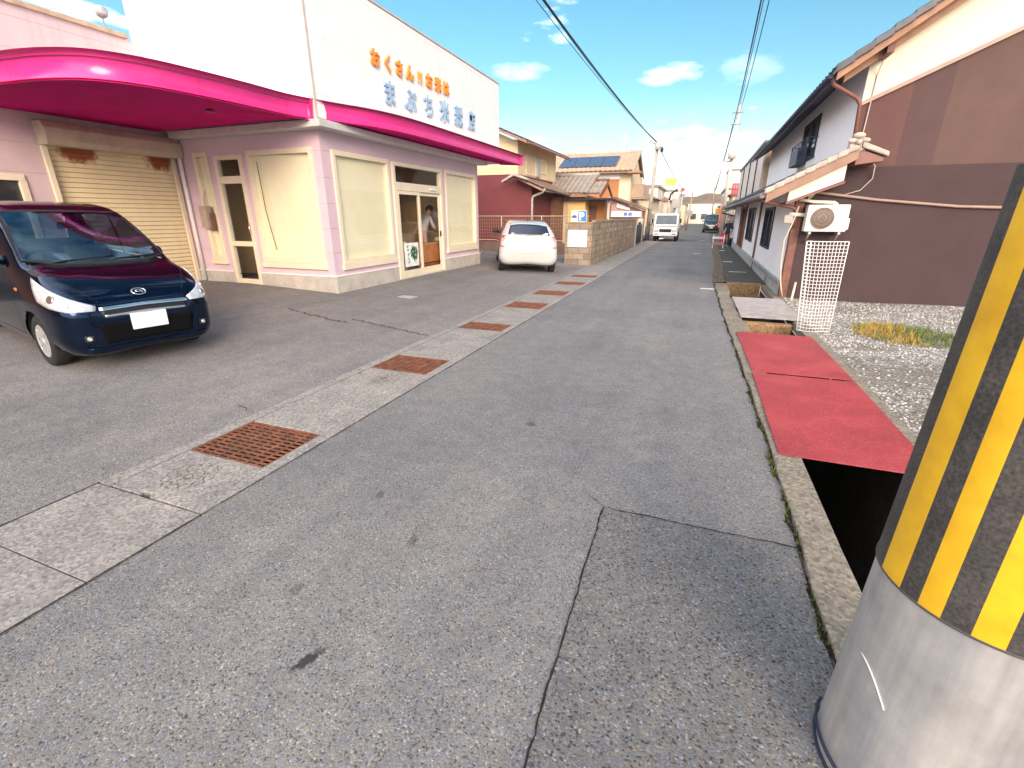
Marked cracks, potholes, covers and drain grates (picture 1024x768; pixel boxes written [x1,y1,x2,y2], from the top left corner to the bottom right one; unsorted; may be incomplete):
crack [288,300,428,336]
drain grate [191,422,319,468]
drain grate [371,355,449,375]
drain grate [459,322,511,332]
drain grate [504,301,548,309]
